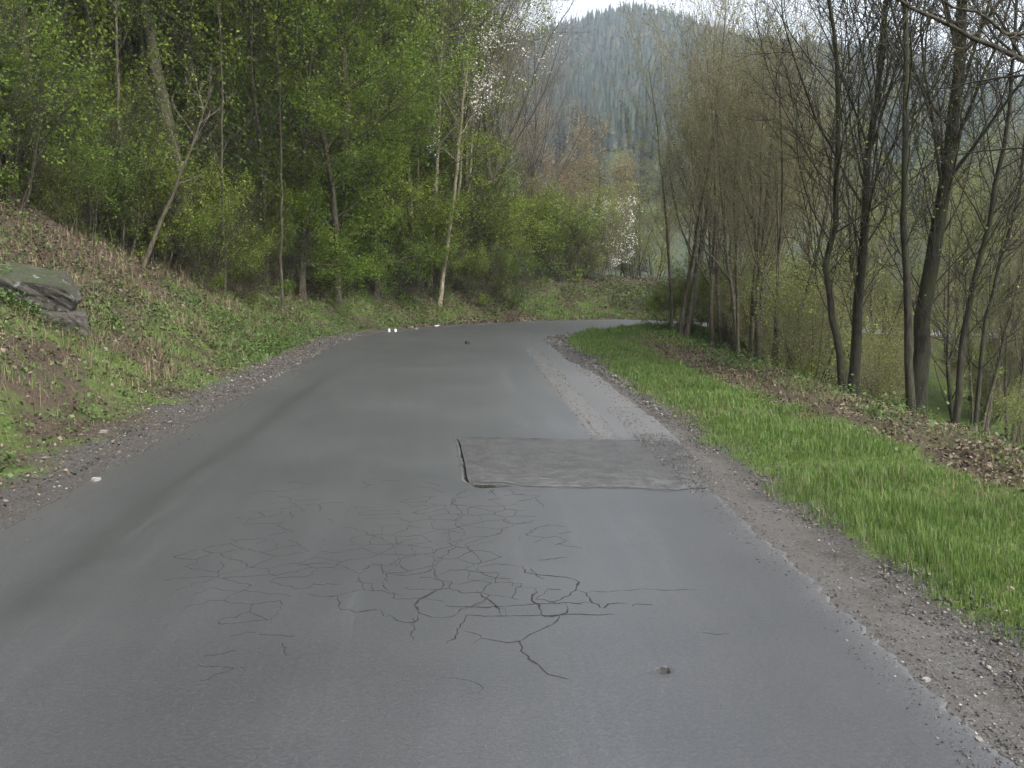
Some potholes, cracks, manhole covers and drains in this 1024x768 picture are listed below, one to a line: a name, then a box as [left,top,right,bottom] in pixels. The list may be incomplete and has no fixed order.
crack [165,479,696,693]
